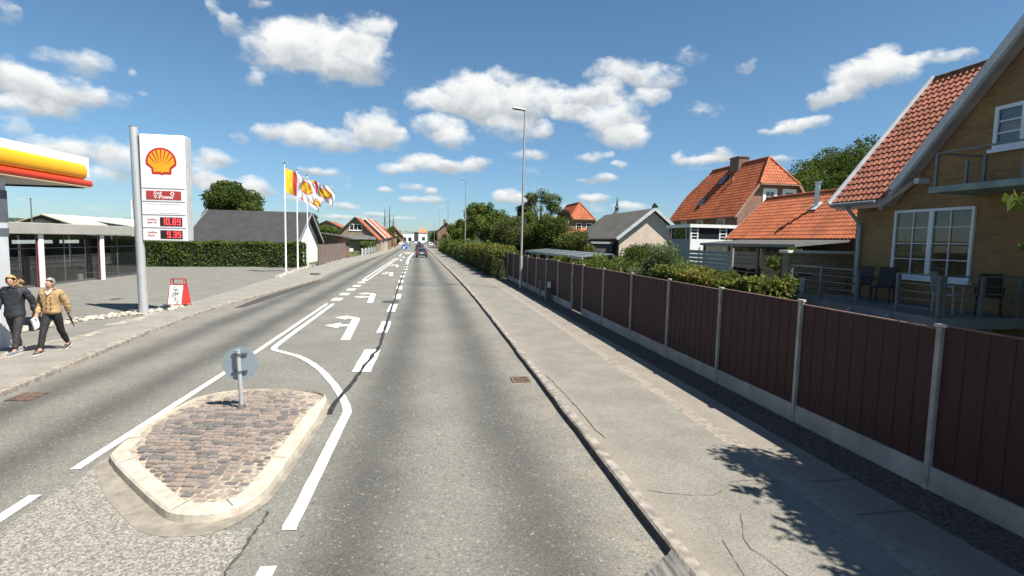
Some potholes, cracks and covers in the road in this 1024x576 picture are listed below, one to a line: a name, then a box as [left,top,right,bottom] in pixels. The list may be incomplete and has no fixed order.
crack [723,513,788,576]
crack [546,375,605,438]
crack [224,511,269,576]
